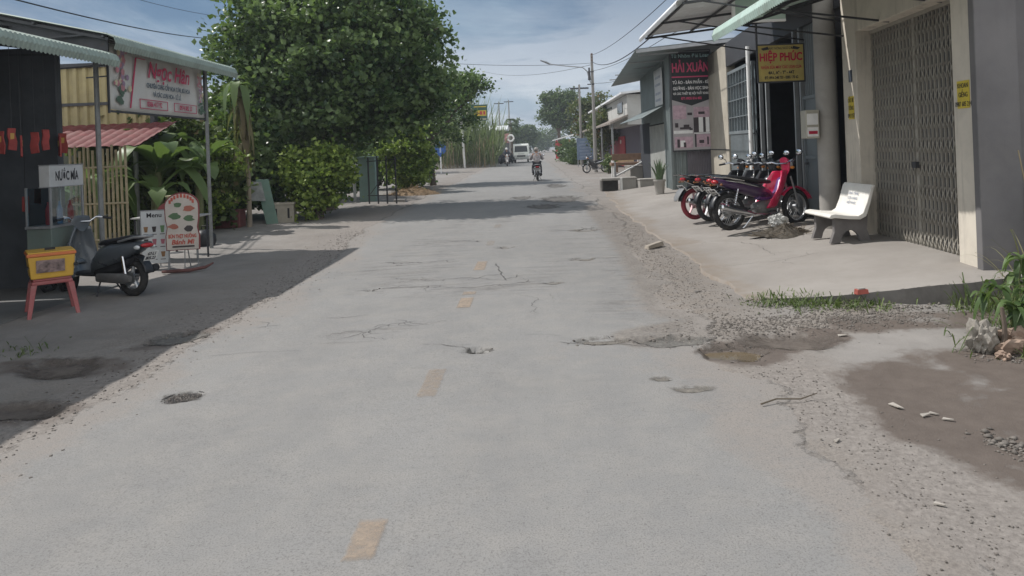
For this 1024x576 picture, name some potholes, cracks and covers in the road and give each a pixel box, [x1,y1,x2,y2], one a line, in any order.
crack [357,239,553,306]
pothole [632,335,710,348]
crack [327,315,439,339]
pothole [567,336,635,346]
pothole [697,342,773,363]
